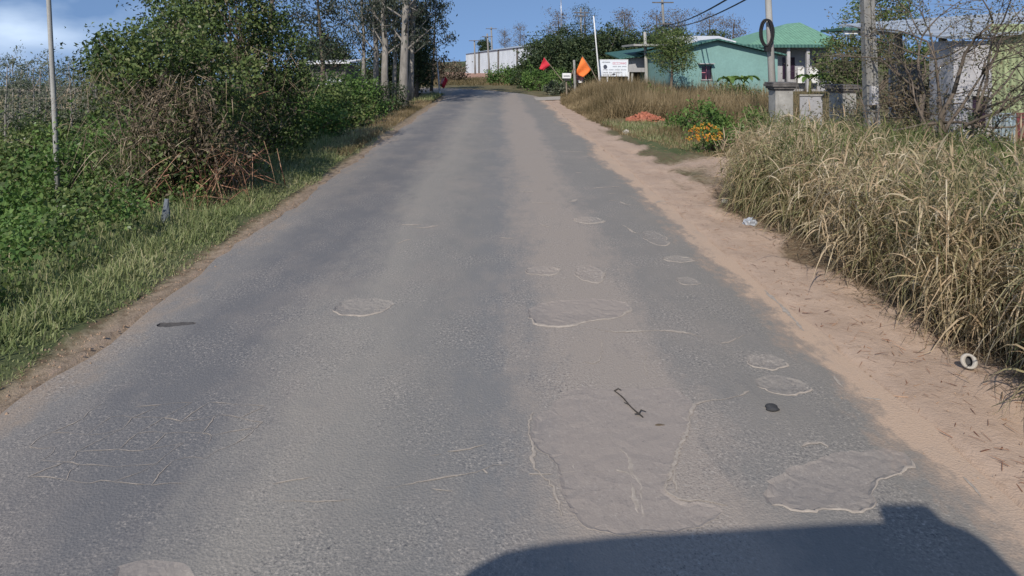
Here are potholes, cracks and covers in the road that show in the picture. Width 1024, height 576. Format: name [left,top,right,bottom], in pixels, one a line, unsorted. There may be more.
crack [28,402,265,485]
